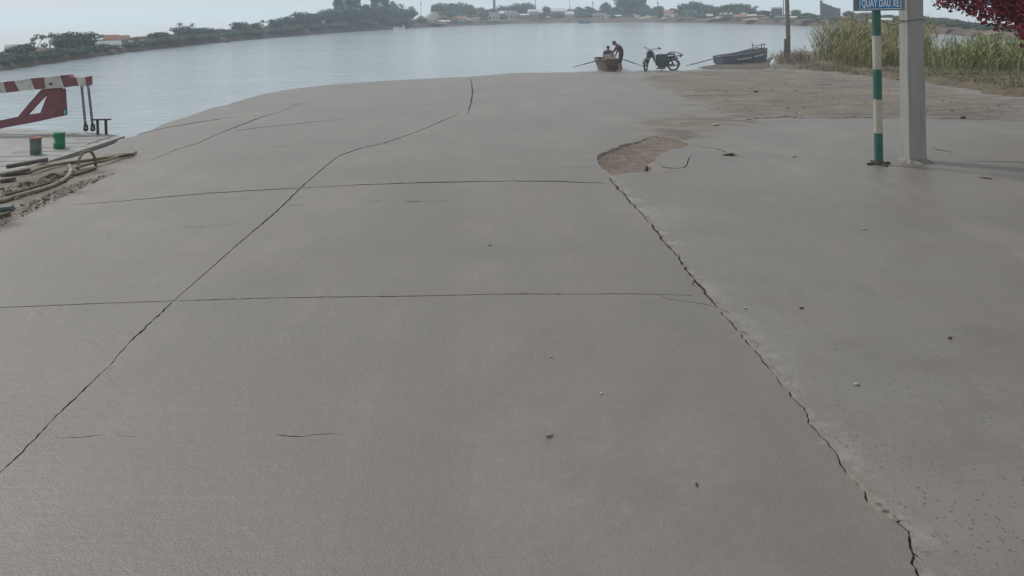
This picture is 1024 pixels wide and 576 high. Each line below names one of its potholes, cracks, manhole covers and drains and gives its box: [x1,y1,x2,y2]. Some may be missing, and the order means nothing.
pothole [596,135,690,176]
crack [0,102,924,576]
